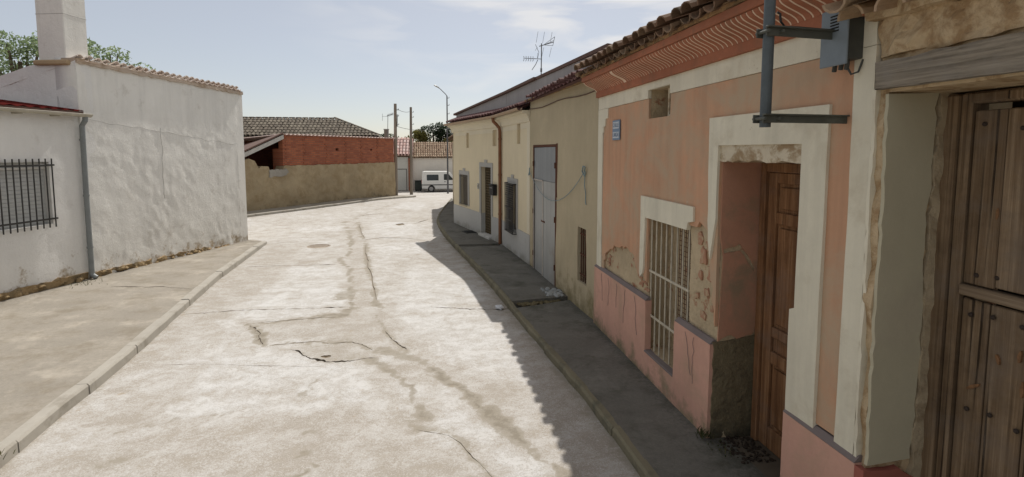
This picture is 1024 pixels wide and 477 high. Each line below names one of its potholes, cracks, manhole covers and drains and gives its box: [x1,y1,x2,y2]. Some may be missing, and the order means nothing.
crack [177,307,406,367]
crack [359,214,377,299]
